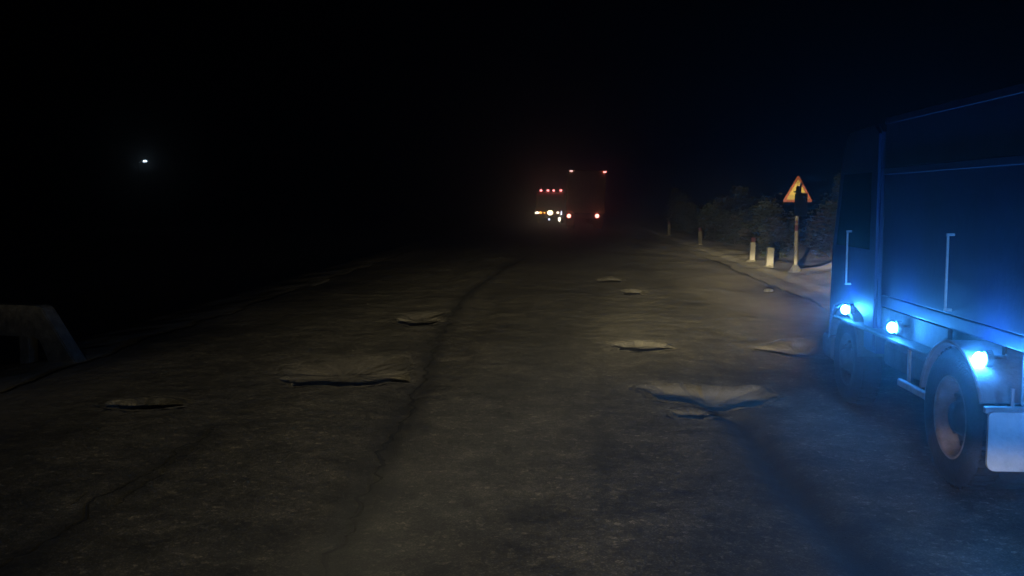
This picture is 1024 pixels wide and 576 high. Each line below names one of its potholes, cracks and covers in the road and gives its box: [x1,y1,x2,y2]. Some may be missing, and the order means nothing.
pothole [96,396,191,412]
pothole [747,338,832,361]
pothole [661,406,733,422]
crack [321,255,528,576]
pothole [632,382,786,413]
pothole [391,311,450,327]
pothole [272,355,420,388]
crack [1,426,216,568]
pothole [603,340,680,352]
